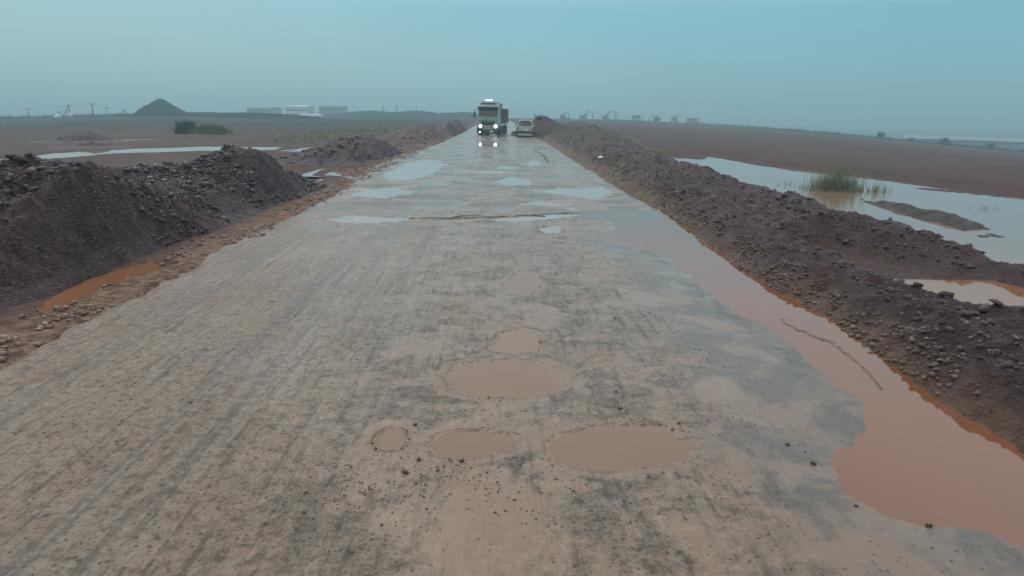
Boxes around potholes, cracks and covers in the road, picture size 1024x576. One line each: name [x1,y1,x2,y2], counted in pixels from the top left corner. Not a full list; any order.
pothole [541,422,704,474]
pothole [372,427,409,451]
pothole [442,357,567,400]
pothole [497,272,543,297]
pothole [487,327,541,355]
pothole [426,428,522,460]
